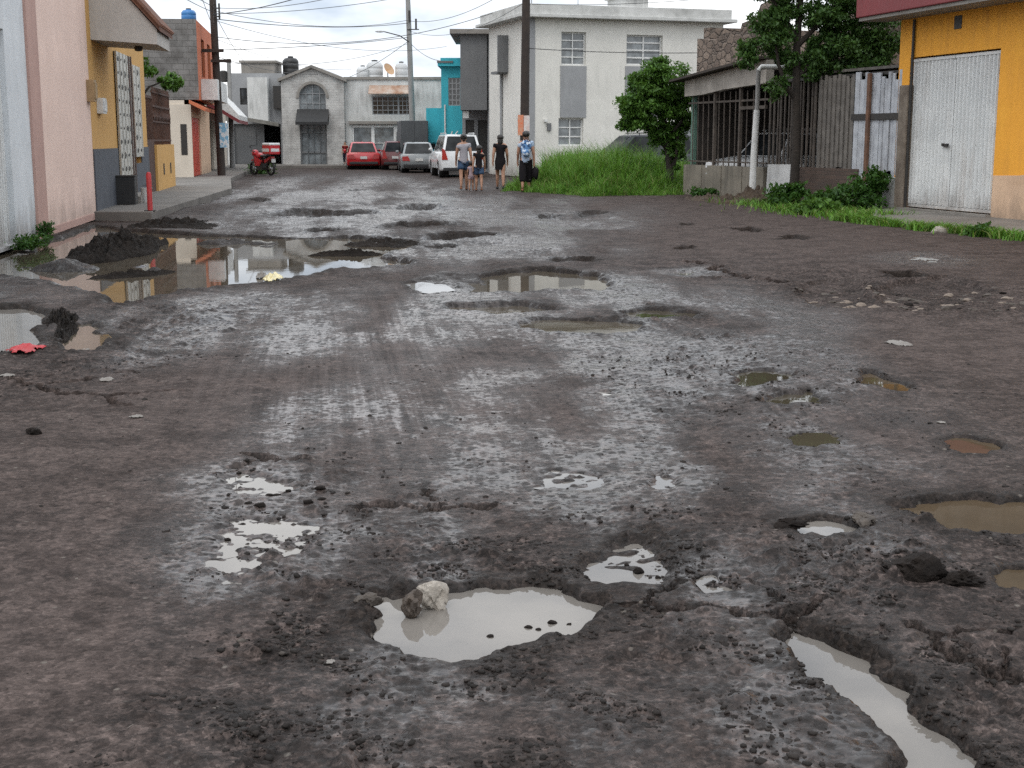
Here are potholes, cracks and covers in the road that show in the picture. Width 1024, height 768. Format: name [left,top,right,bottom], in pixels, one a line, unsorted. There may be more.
pothole [409,266,623,293]
pothole [936,433,1010,456]
pothole [759,615,1009,768]
pothole [399,280,462,294]
pothole [343,568,623,669]
pothole [49,319,122,351]
pothole [720,366,808,387]
pothole [876,490,1024,536]
pothole [509,315,651,335]
pothole [562,526,695,593]
pothole [982,561,1024,591]
pothole [784,432,847,448]
